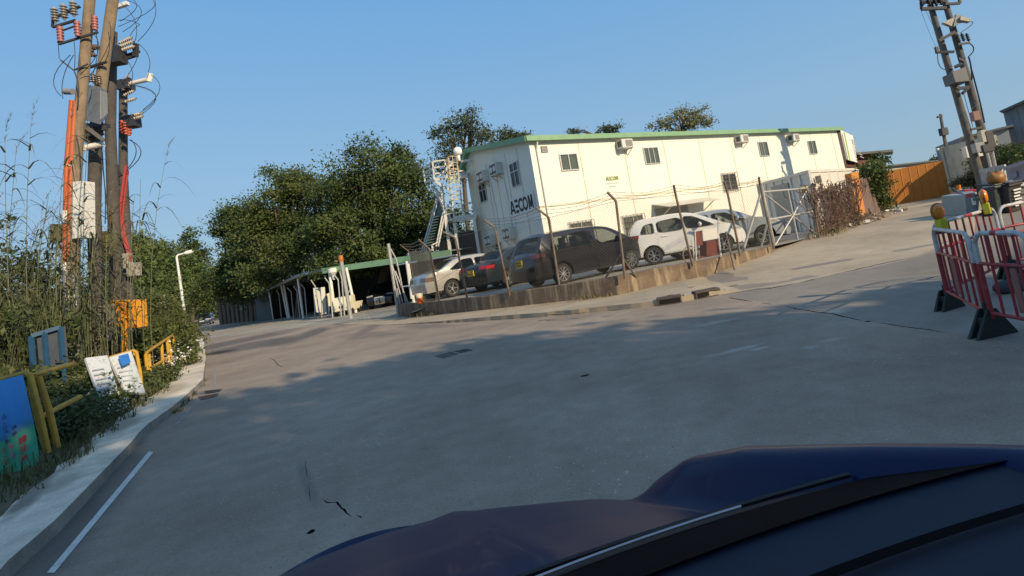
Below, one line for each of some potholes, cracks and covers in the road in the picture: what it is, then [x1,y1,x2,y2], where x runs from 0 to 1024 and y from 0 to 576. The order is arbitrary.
crack [305,461,361,518]
drain grate [198,389,222,400]
